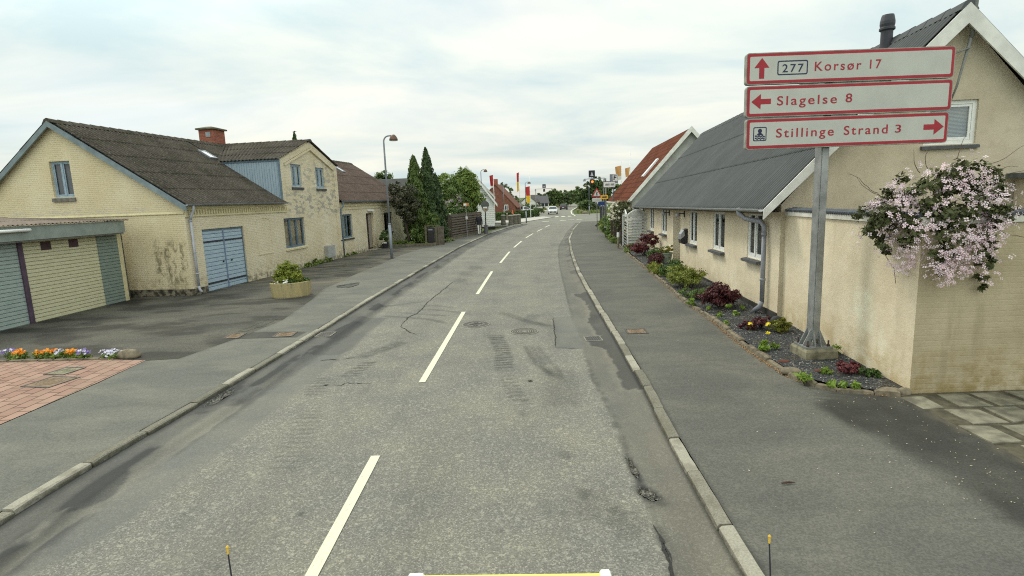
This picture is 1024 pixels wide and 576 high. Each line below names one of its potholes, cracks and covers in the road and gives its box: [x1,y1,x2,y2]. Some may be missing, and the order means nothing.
pothole [637,487,661,501]
utility cover [43,367,86,375]
utility cover [20,376,80,388]
pothole [203,387,235,407]
crack [653,525,674,576]
